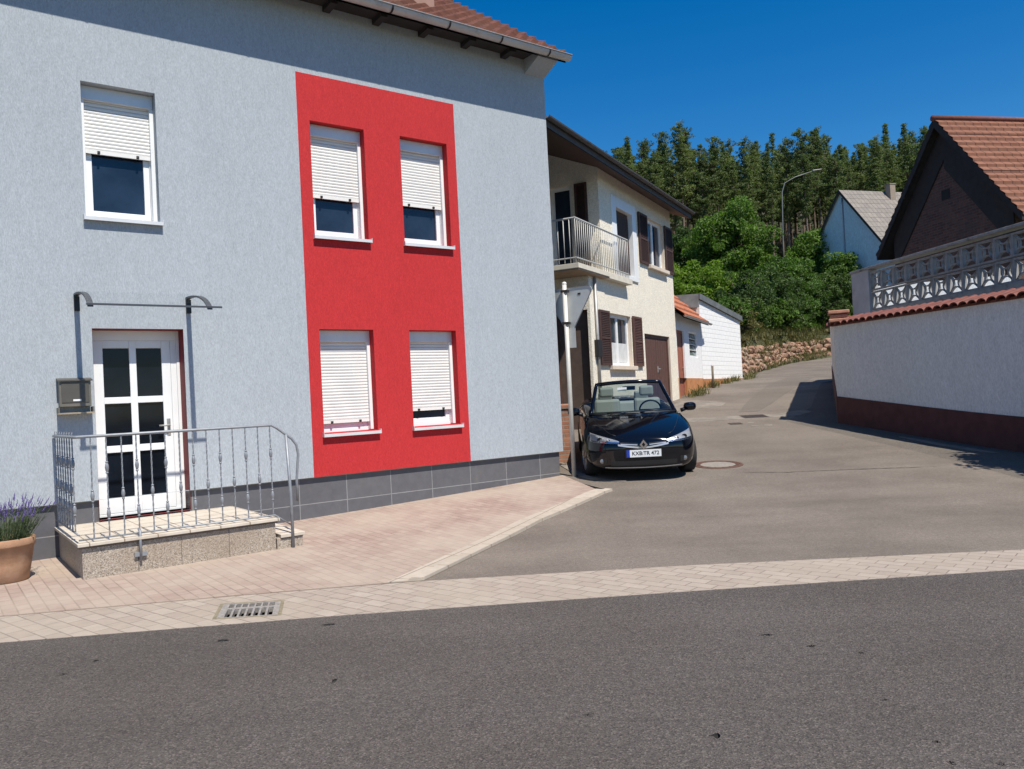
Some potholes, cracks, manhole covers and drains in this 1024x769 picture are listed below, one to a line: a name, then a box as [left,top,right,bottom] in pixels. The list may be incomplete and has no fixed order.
manhole cover [696,460,743,469]
drain grate [212,600,285,620]
